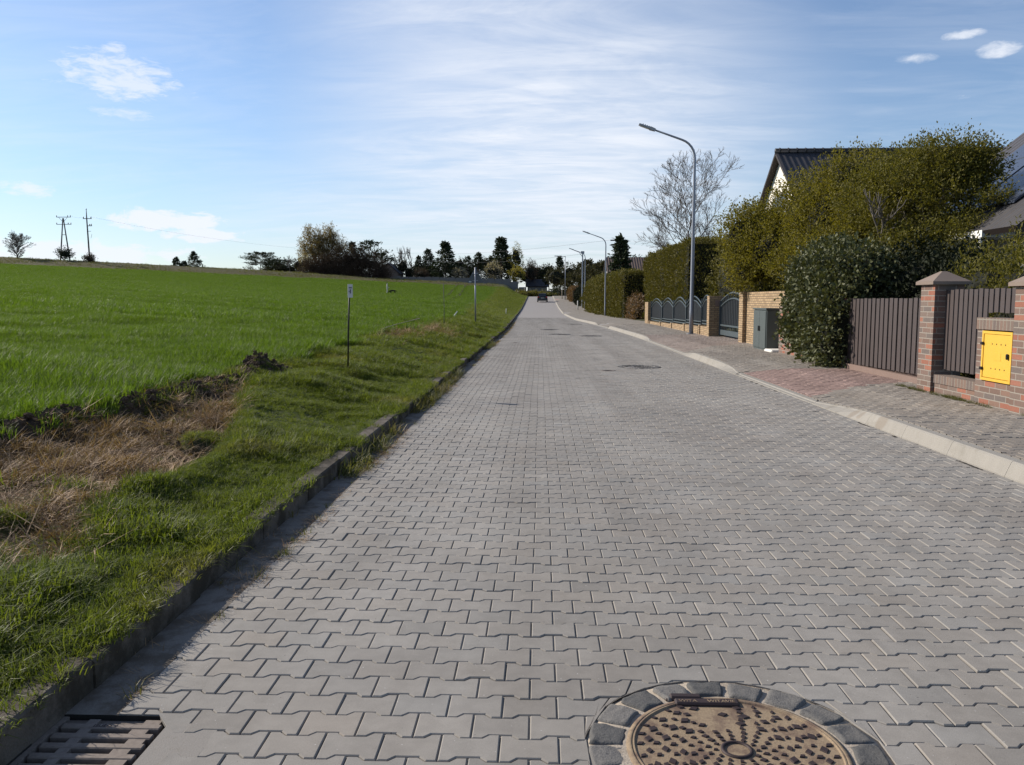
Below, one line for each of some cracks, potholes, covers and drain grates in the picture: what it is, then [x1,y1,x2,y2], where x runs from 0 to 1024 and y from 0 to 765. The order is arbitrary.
manhole cover [586,682,895,765]
drain grate [7,714,165,765]
